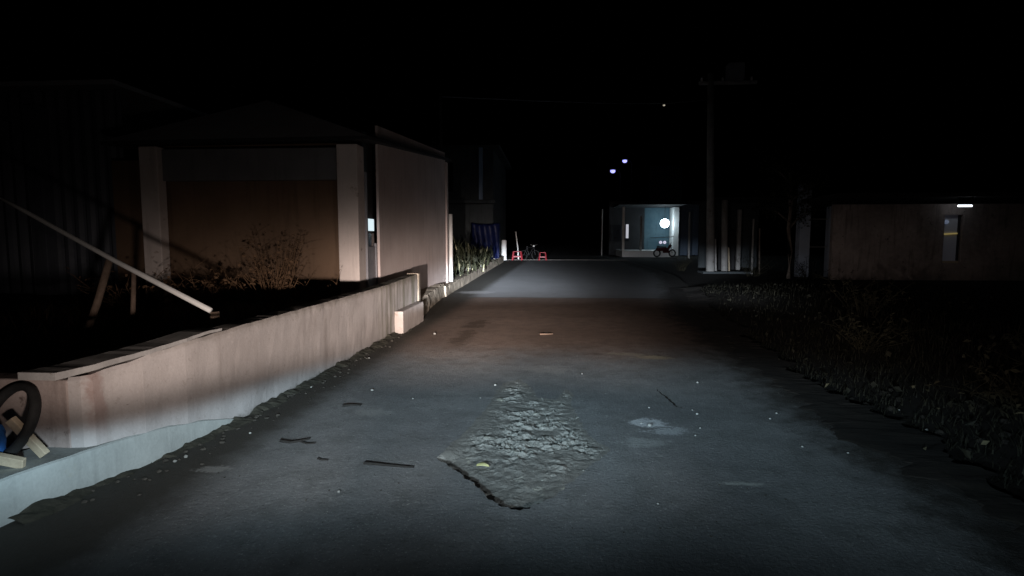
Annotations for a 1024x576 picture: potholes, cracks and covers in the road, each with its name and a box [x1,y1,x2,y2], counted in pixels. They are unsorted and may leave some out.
pothole [437,379,611,511]
